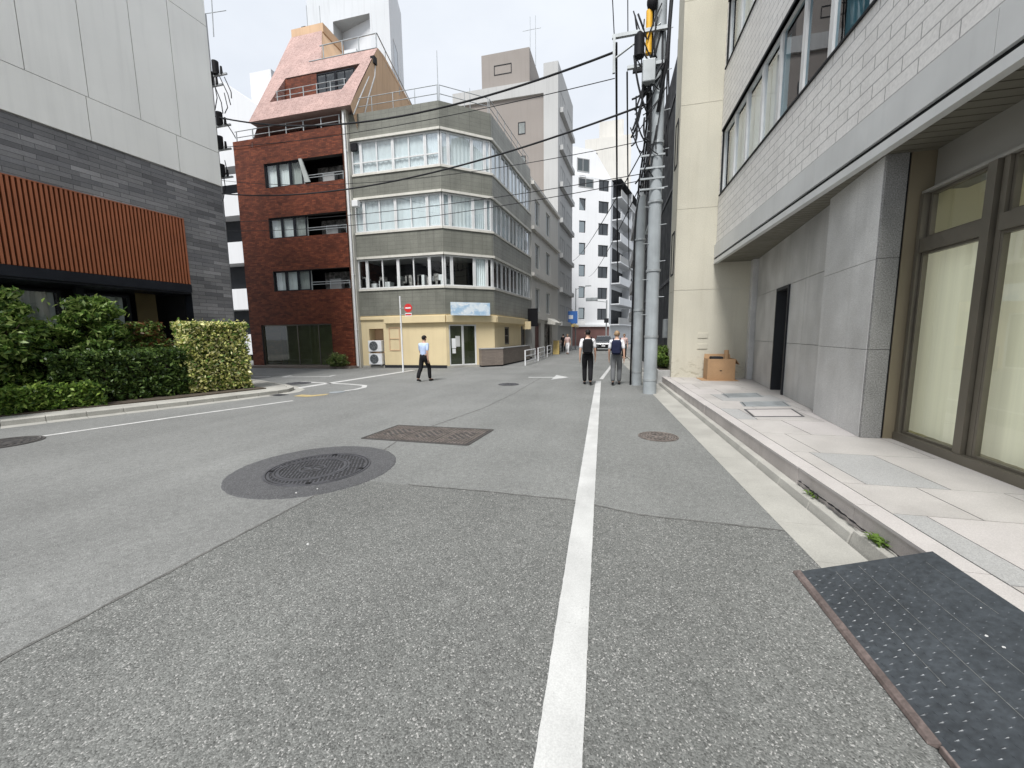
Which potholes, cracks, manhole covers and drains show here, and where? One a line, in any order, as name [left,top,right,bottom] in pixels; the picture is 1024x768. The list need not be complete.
manhole cover [0,436,46,448]
manhole cover [638,431,679,442]
manhole cover [221,446,396,499]
utility cover [744,409,805,417]
manhole cover [361,425,494,446]
